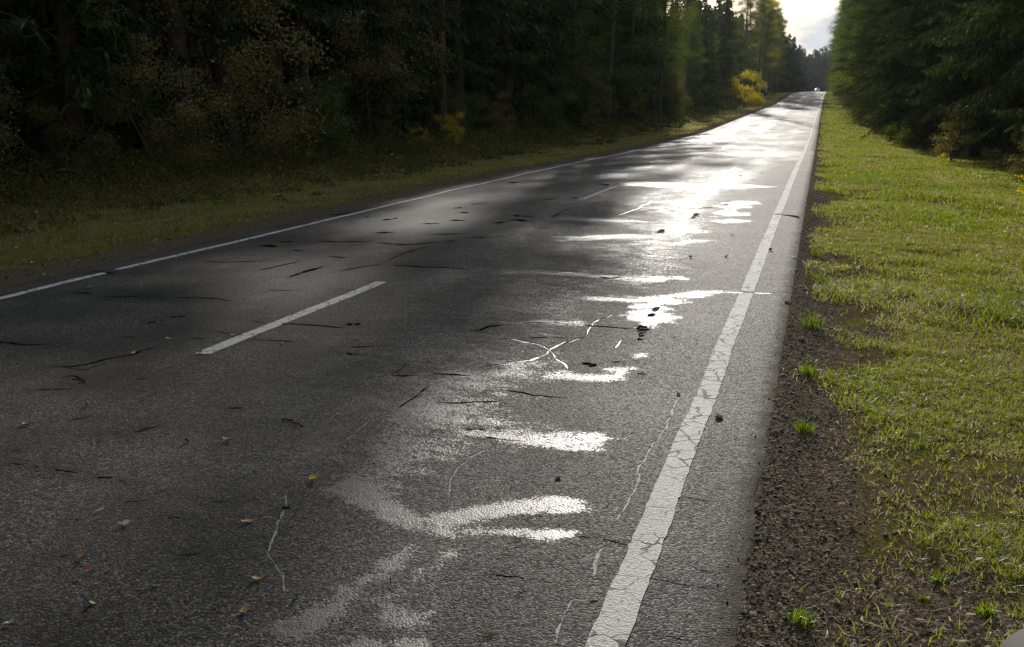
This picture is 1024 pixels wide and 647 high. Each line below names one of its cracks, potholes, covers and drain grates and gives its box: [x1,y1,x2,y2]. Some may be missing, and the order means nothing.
crack [649,564,713,588]
crack [332,314,647,444]
crack [259,490,288,602]
pothole [636,325,650,341]
